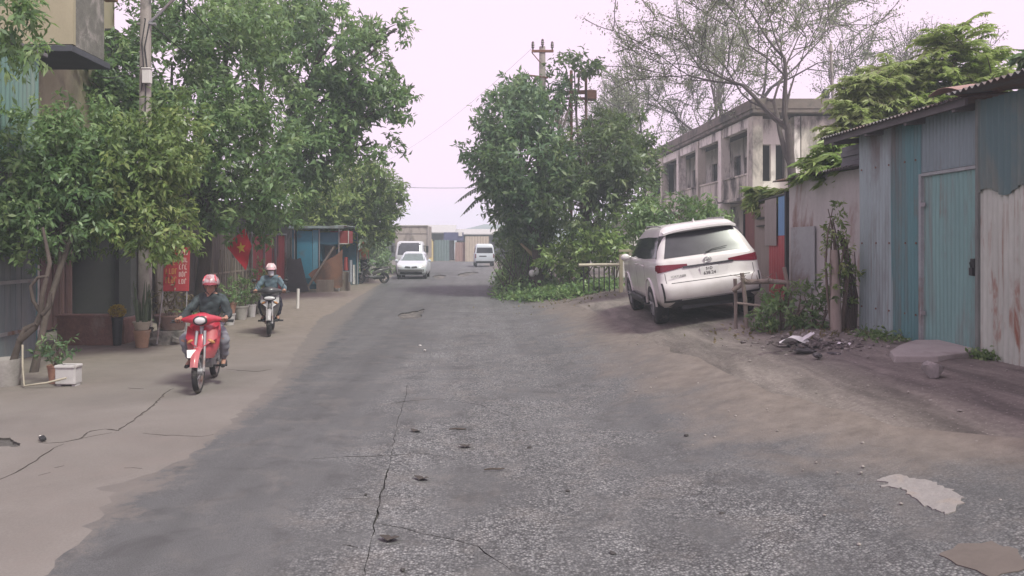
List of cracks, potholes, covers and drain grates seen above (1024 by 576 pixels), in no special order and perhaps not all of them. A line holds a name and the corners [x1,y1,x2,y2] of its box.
crack [316,386,508,575]
pothole [0,438,21,447]
pothole [398,310,424,320]
crack [1,388,214,479]
